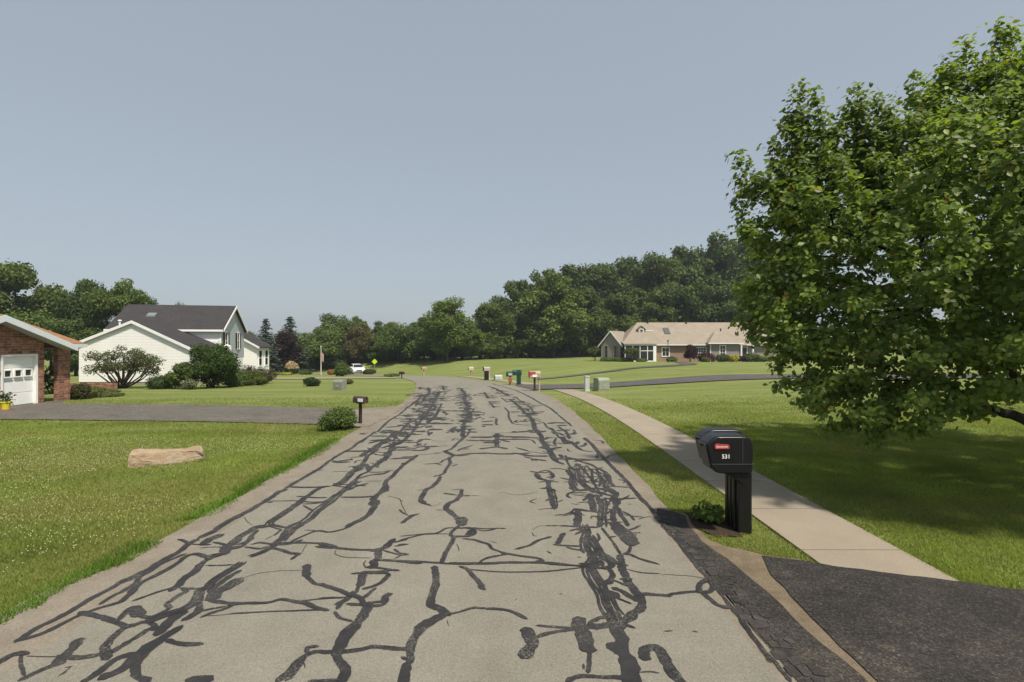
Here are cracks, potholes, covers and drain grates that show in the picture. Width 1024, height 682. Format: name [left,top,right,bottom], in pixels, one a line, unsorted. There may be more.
crack [659,516,836,682]
